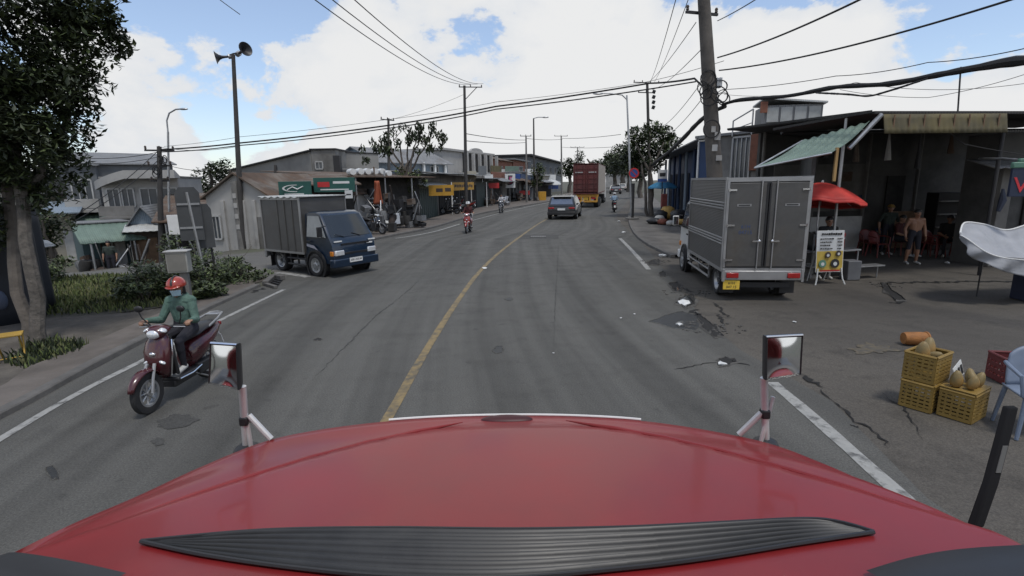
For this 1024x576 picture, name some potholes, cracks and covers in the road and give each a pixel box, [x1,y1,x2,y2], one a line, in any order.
crack [802,374,923,444]
pothole [668,281,683,293]
pothole [648,311,704,331]
